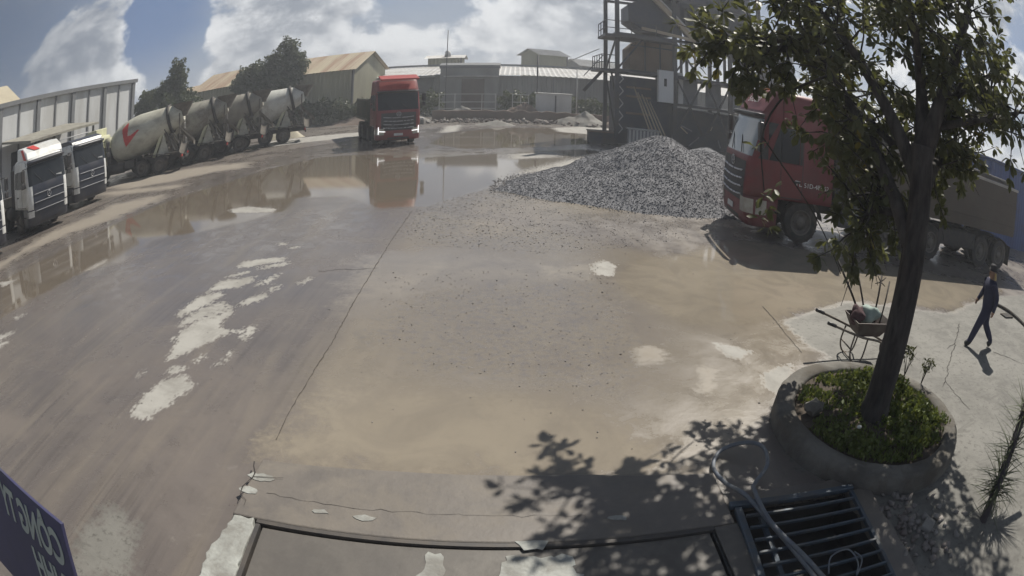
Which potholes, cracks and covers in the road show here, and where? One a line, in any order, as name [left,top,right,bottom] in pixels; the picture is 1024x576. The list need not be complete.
drain grate [728,484,896,576]
crack [240,461,577,517]
